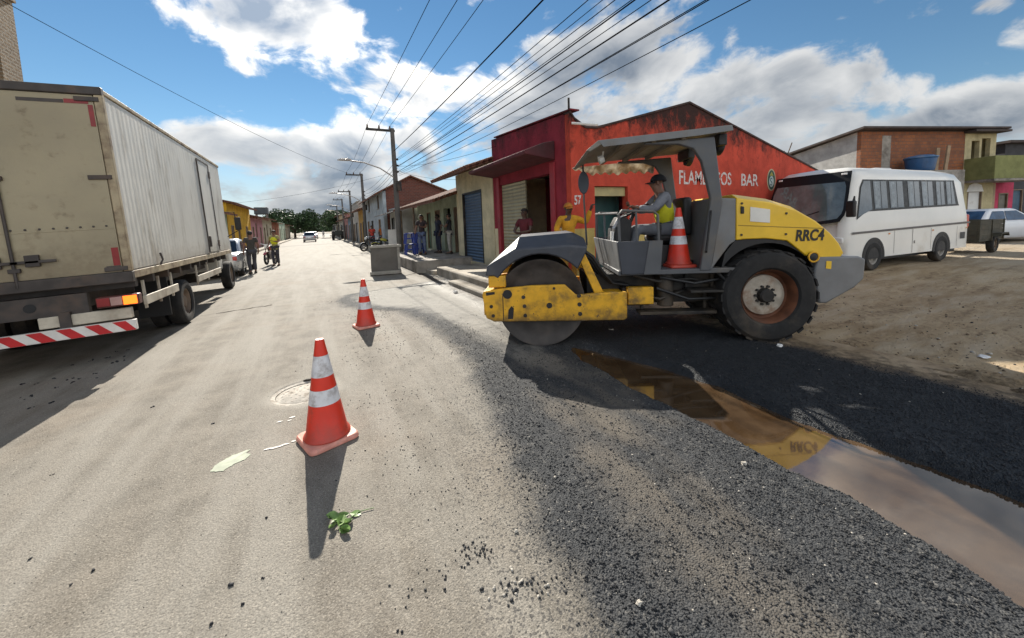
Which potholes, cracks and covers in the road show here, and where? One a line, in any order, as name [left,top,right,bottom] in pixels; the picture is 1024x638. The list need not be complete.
manhole cover [270,381,311,406]
